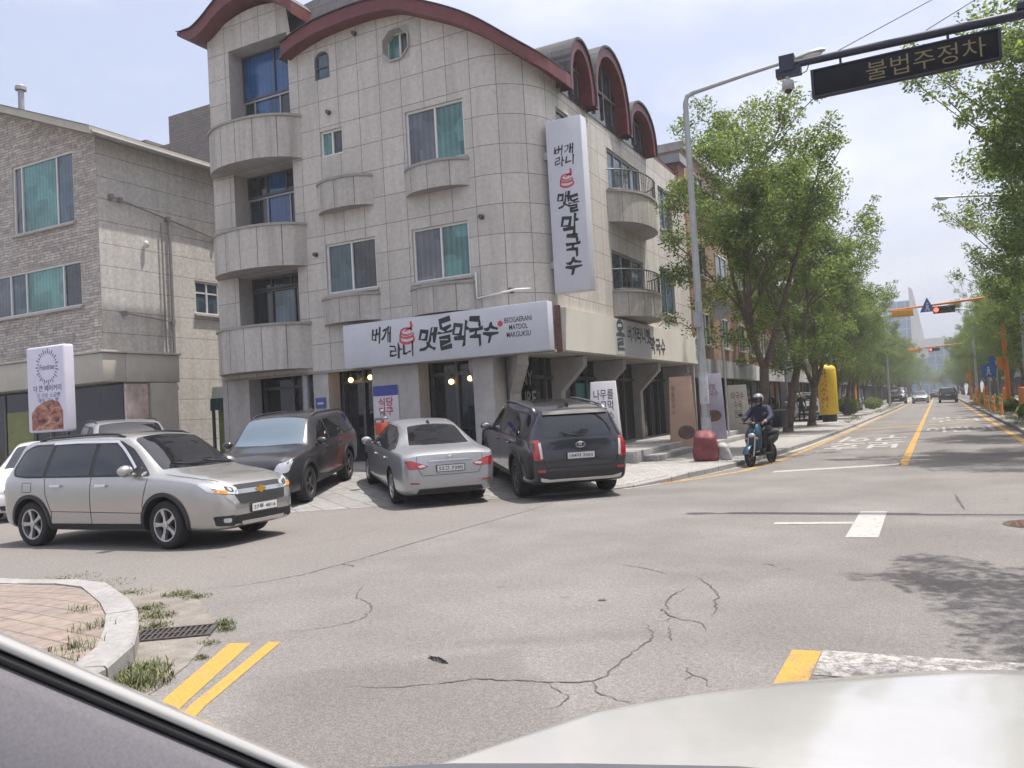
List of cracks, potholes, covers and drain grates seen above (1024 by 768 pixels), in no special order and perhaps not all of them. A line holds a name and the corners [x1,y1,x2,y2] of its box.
manhole cover [1003,519,1024,528]
drain grate [139,623,218,642]
crack [364,564,727,707]
